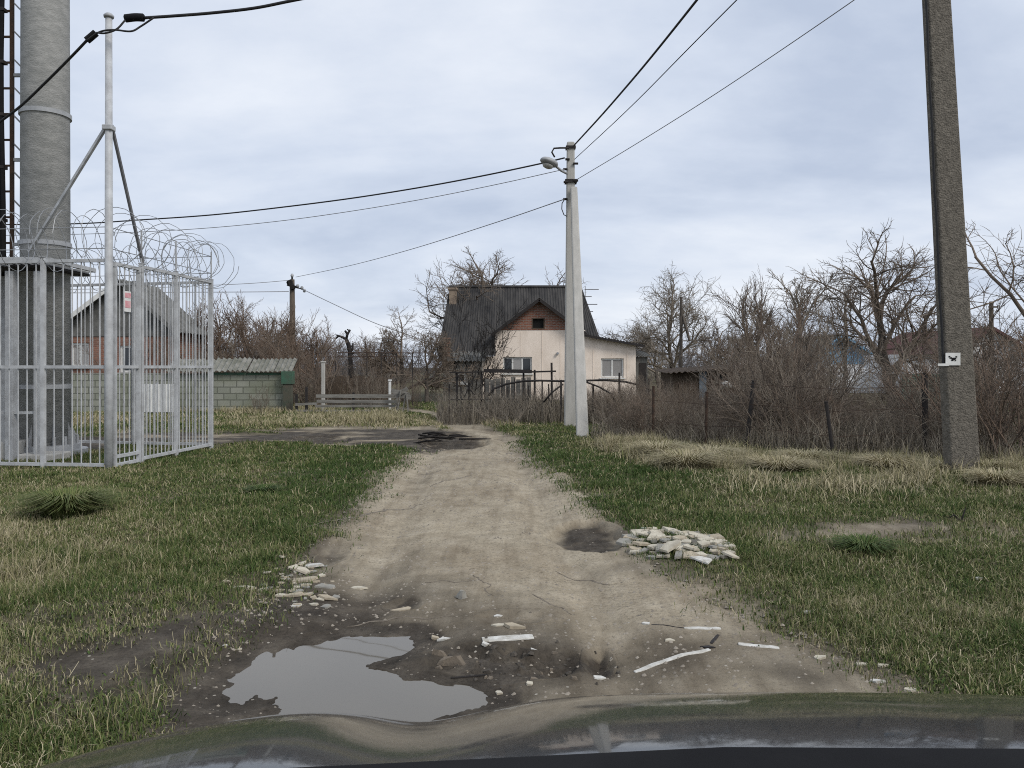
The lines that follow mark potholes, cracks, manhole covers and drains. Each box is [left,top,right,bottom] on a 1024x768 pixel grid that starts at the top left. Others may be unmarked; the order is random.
pothole [579,645,618,678]
crack [533,571,609,614]
pothole [172,626,519,728]
